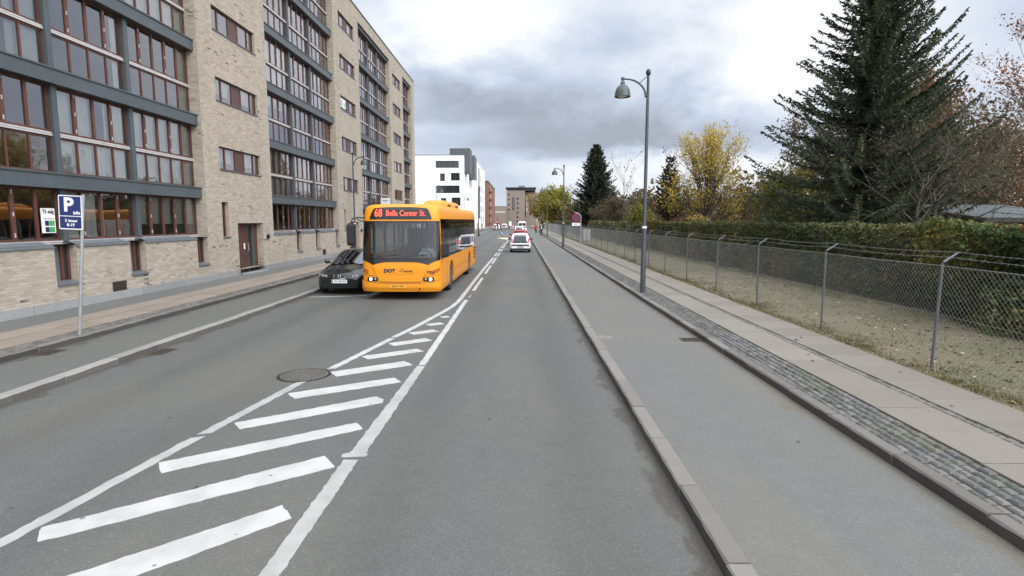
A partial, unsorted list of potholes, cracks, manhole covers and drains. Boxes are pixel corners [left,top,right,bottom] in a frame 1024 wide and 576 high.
manhole cover [276,368,332,382]
